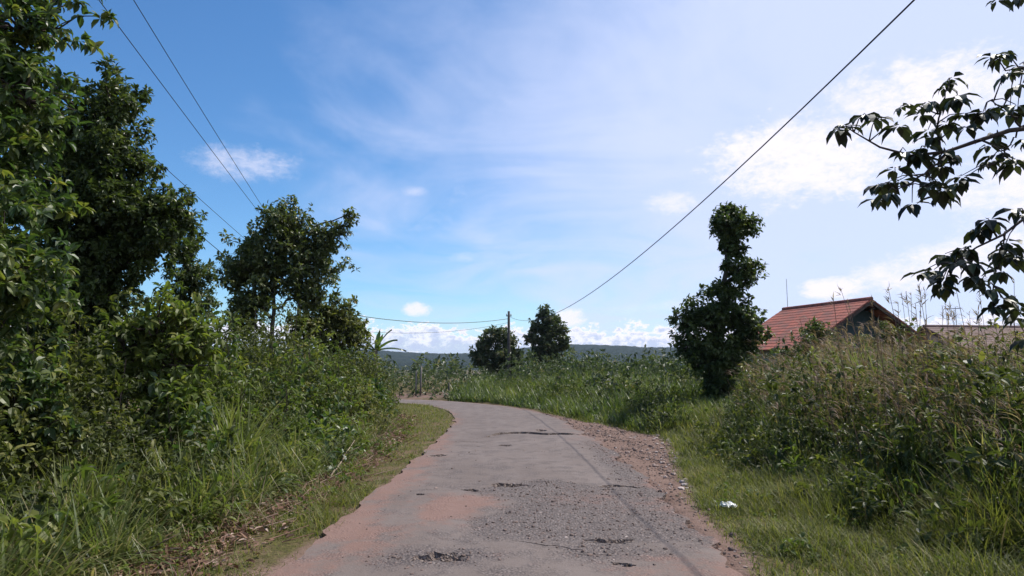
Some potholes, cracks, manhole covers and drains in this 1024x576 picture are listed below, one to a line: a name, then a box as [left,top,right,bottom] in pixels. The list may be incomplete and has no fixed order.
pothole [410,552,471,562]
crack [512,540,616,555]
